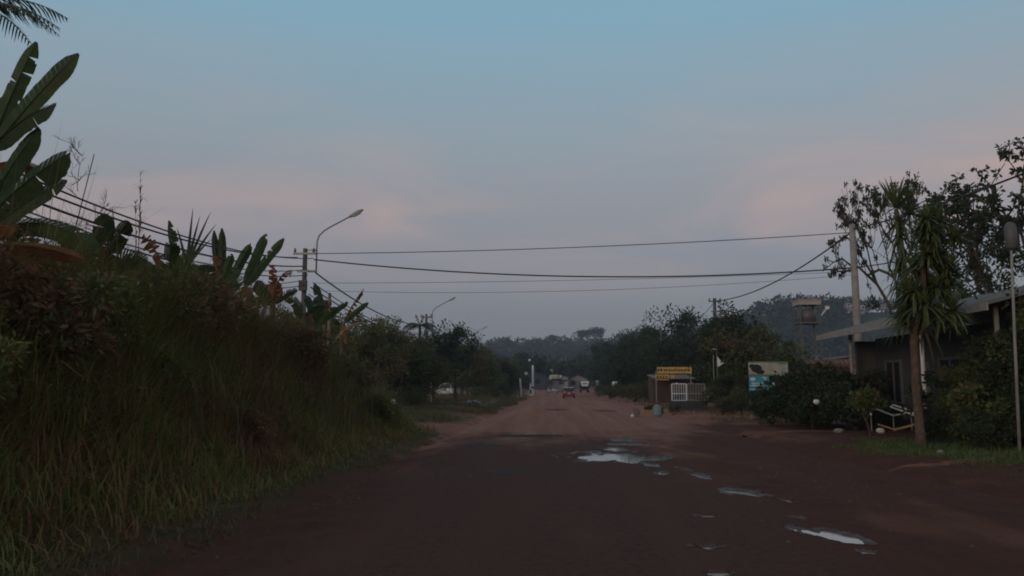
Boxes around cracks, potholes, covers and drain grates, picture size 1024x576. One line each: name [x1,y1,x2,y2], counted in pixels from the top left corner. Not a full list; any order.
pothole [784,523,878,545]
pothole [551,450,674,464]
pothole [716,487,775,497]
pothole [680,469,712,480]
